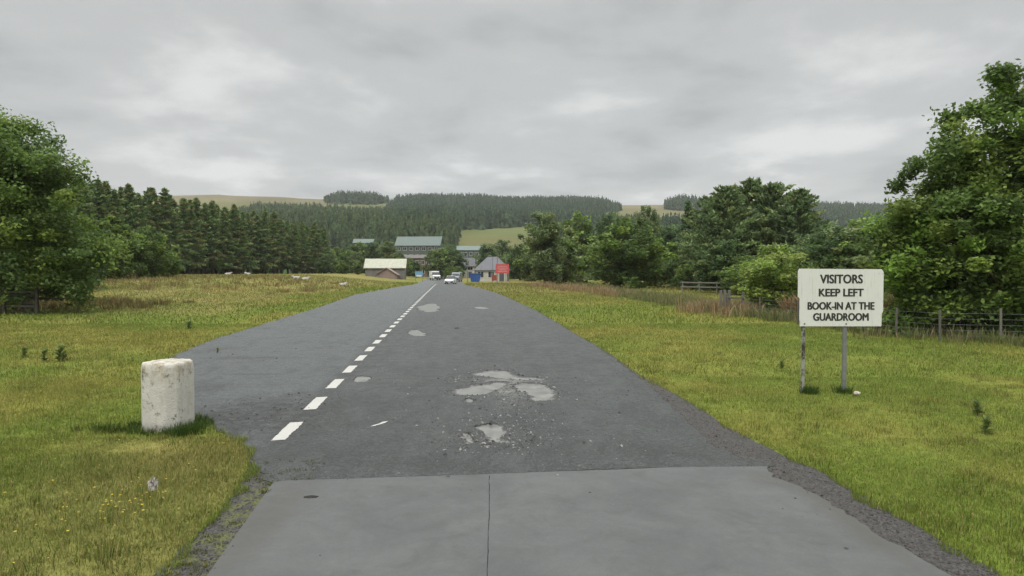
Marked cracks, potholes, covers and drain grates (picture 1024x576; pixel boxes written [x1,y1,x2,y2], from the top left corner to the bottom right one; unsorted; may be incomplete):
pothole [416,303,441,312]
pothole [469,369,547,380]
pothole [513,382,560,401]
pothole [448,381,510,396]
pothole [474,423,511,443]
